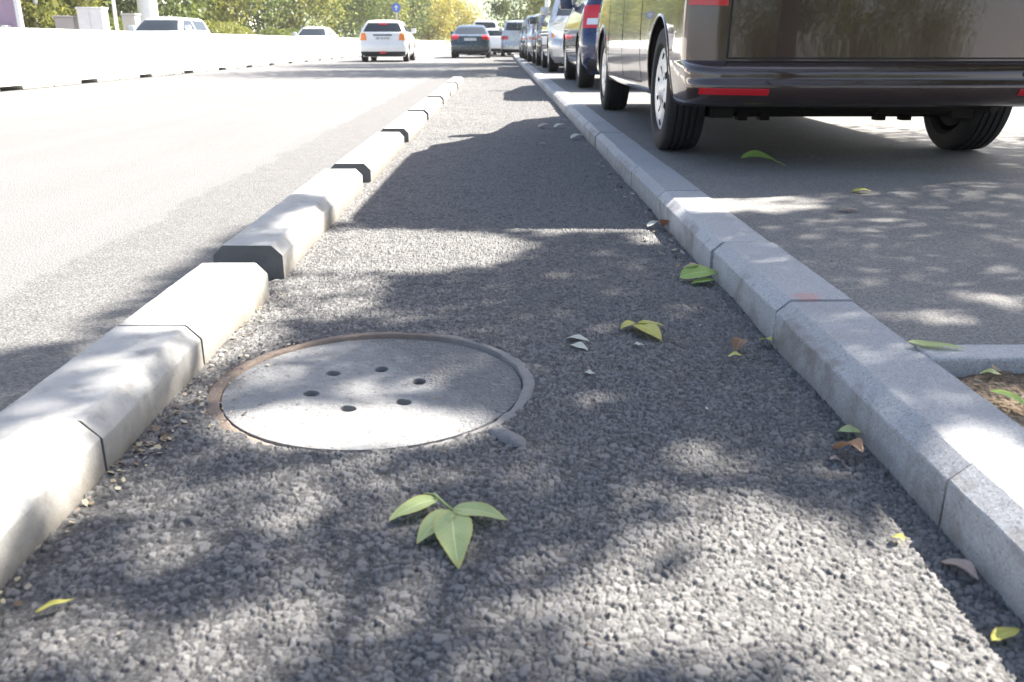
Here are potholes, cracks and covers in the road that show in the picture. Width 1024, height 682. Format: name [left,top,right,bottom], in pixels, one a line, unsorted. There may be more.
manhole cover [205,332,535,453]
